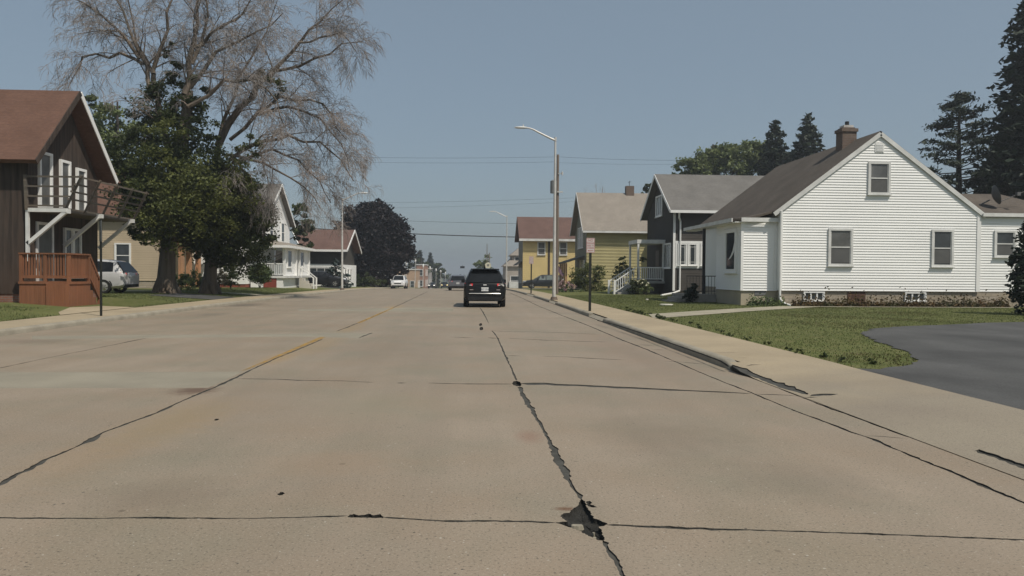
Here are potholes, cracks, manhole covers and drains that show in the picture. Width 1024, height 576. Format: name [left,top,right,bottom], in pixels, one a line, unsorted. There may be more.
pothole [556,499,607,542]
